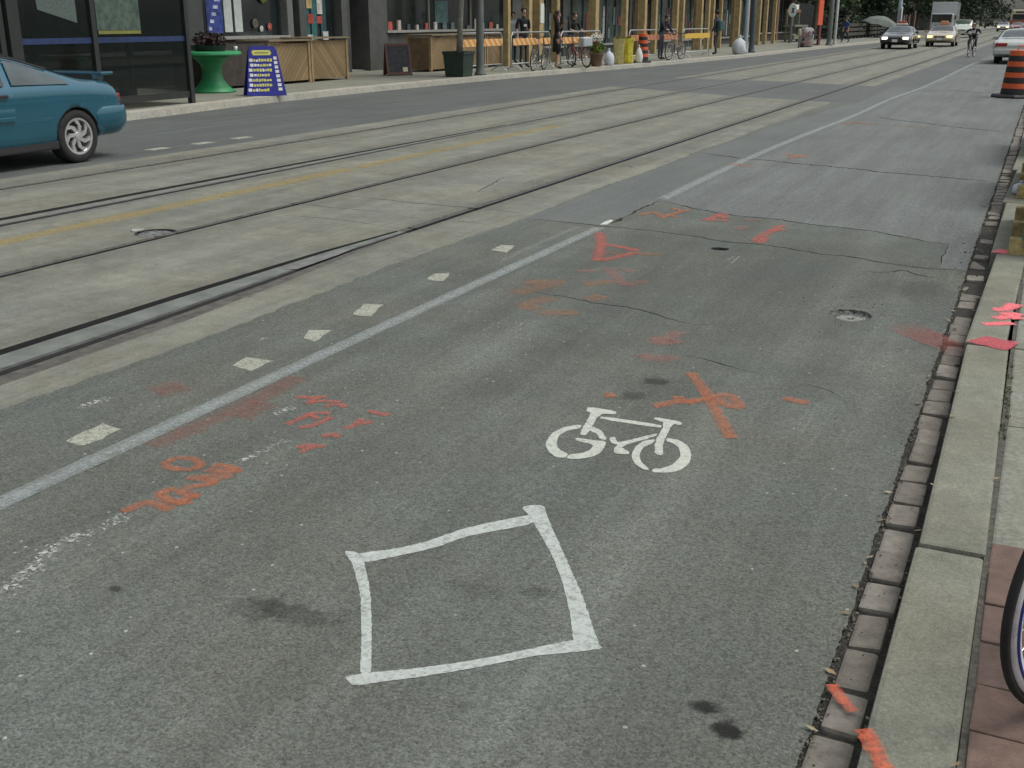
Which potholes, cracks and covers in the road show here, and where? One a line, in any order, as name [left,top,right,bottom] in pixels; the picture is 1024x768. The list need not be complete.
crack [522,289,699,325]
manhole cover [131,229,176,238]
